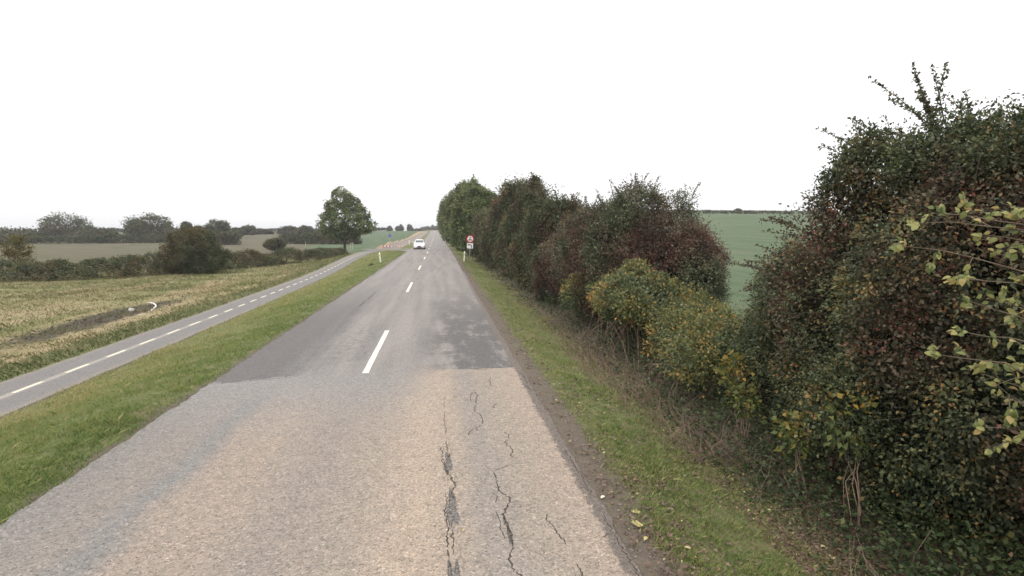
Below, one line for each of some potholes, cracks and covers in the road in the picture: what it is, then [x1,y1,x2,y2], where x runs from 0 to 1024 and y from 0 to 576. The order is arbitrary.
crack [468,378,495,435]
crack [440,397,460,576]
crack [493,432,523,576]
